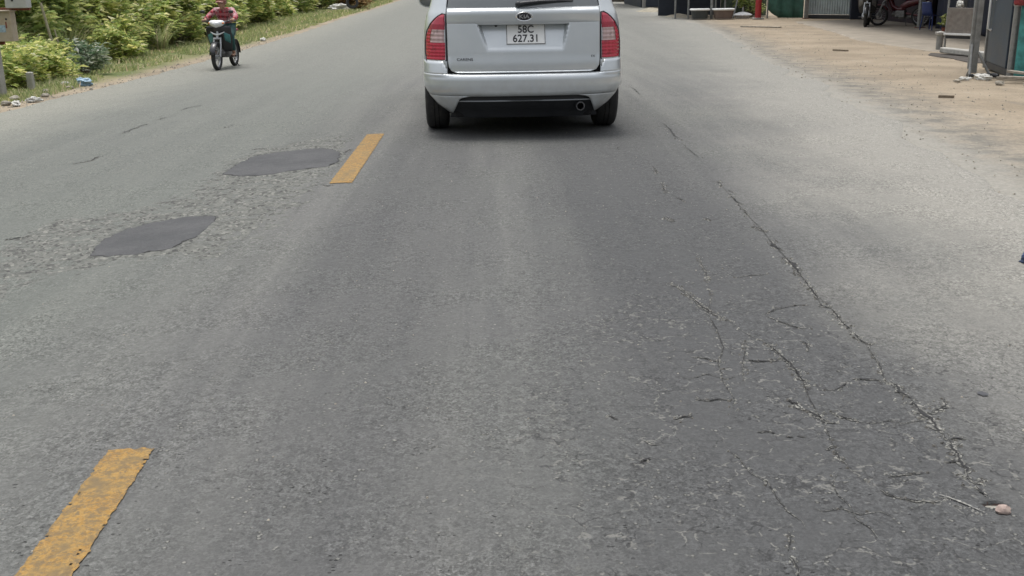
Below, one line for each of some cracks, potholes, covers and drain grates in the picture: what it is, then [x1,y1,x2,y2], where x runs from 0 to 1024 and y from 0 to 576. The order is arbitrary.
crack [652,166,711,221]
crack [667,180,992,576]
